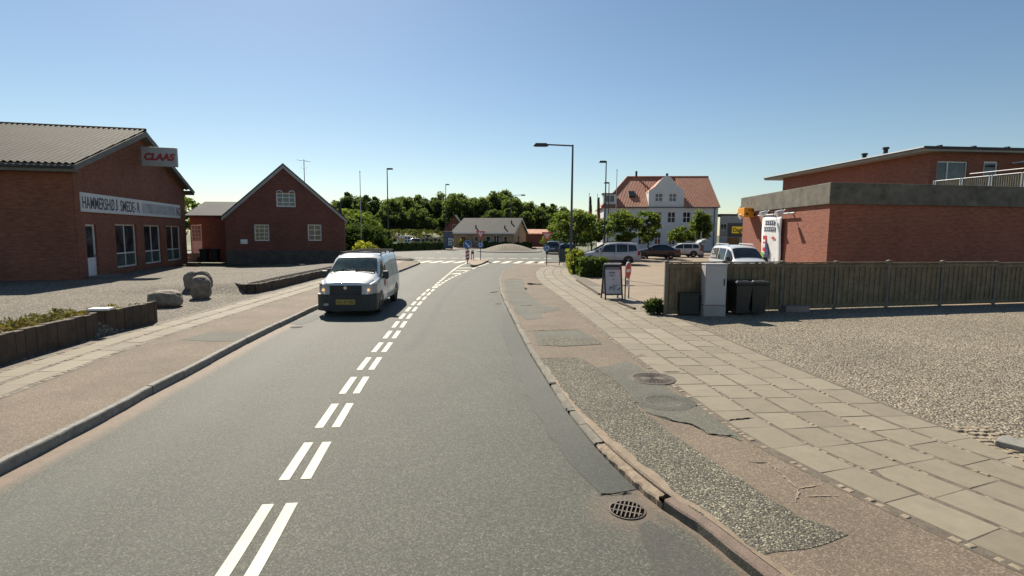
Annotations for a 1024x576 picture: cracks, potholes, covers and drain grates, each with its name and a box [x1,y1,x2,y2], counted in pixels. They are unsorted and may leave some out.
drain grate [608,500,646,520]
crack [748,461,838,502]
manhole cover [629,372,676,385]
